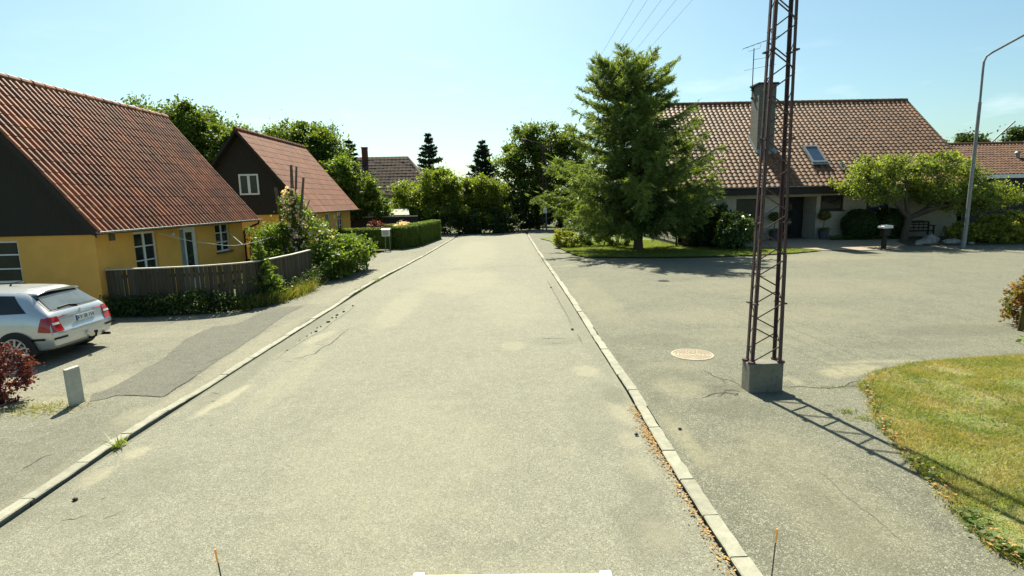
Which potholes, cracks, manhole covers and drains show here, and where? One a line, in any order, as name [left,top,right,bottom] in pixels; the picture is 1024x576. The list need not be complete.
manhole cover [671,349,714,361]
crack [821,473,903,541]
crack [703,372,740,398]
